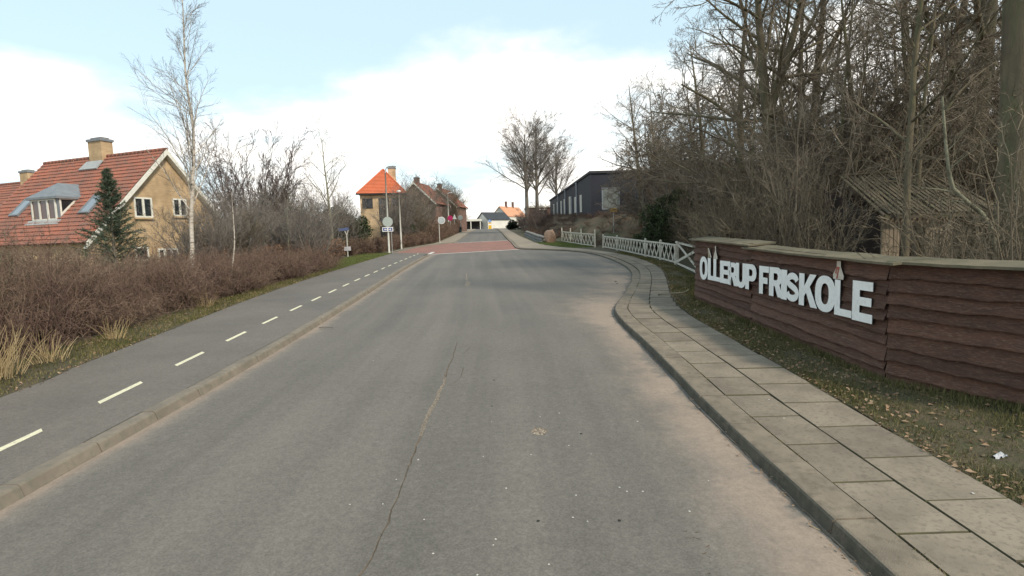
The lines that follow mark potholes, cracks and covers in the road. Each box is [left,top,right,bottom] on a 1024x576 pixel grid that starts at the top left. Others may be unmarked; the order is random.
crack [358,345,465,576]
